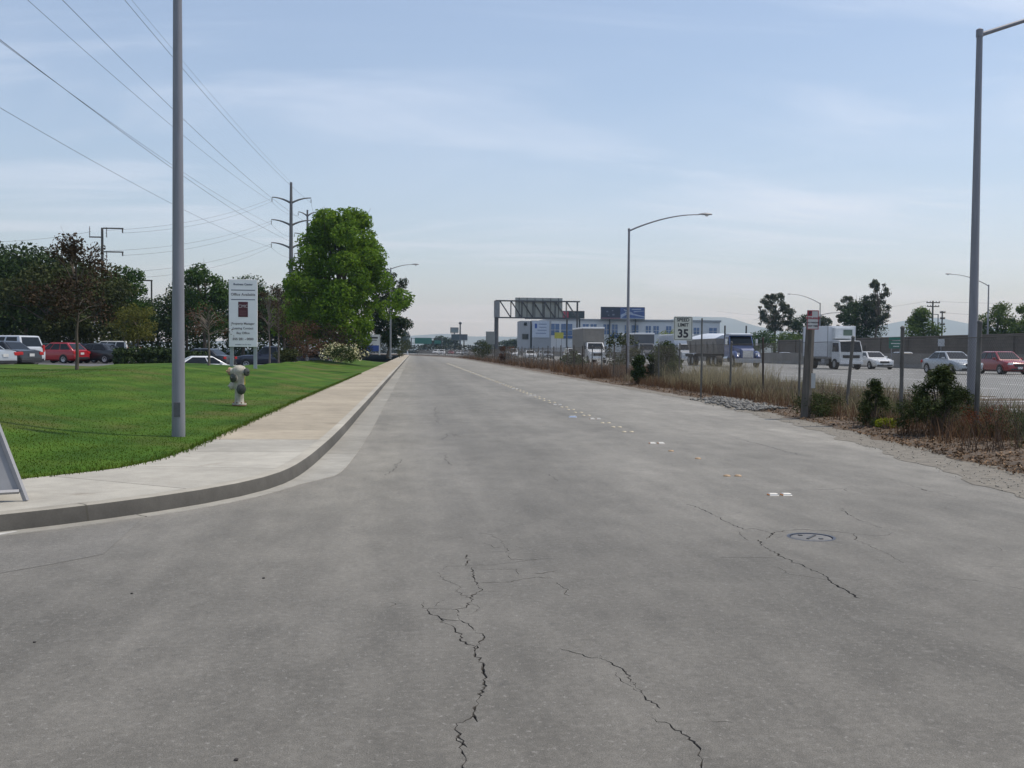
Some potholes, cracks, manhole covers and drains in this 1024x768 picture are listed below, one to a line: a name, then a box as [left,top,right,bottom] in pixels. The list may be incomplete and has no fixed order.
crack [562,649,703,768]
manhole cover [787,533,836,541]
crack [392,533,569,768]
crack [687,504,901,598]
